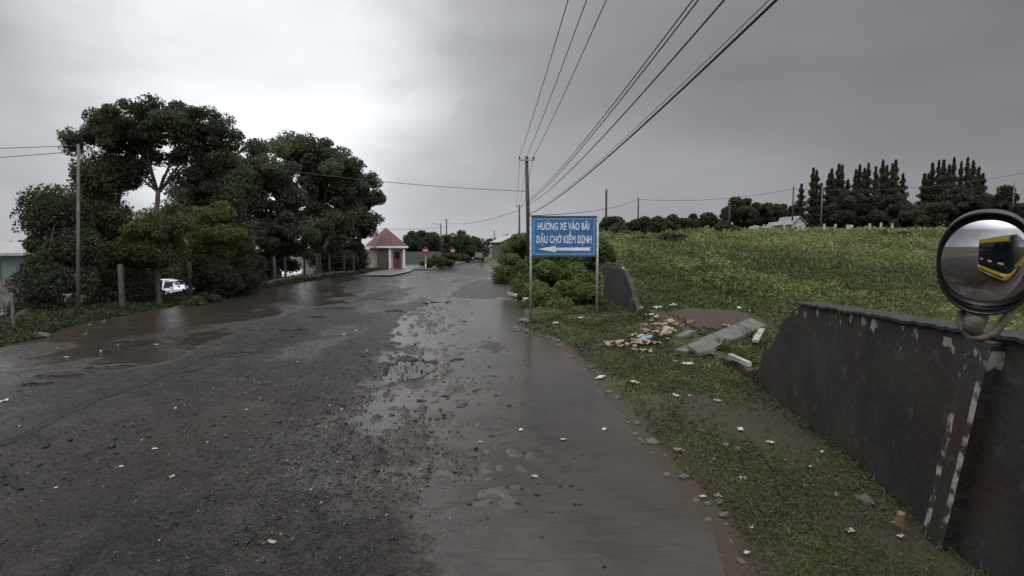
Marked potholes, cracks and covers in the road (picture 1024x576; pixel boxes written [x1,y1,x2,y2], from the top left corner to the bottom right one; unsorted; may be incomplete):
pothole [381,358,438,383]
